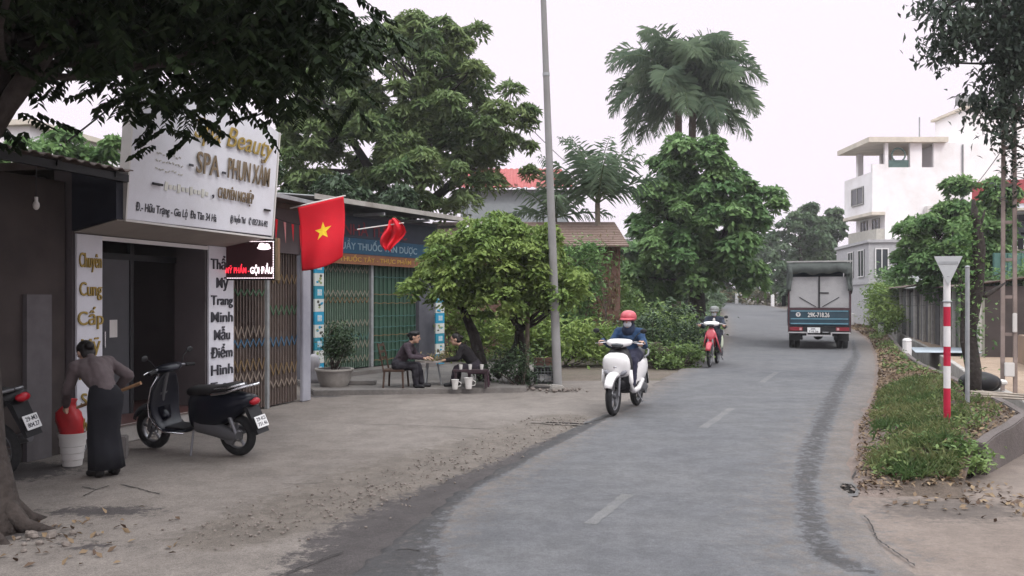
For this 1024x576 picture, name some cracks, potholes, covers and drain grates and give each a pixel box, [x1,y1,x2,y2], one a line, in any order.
crack [864,515,915,566]
crack [82,484,160,496]
